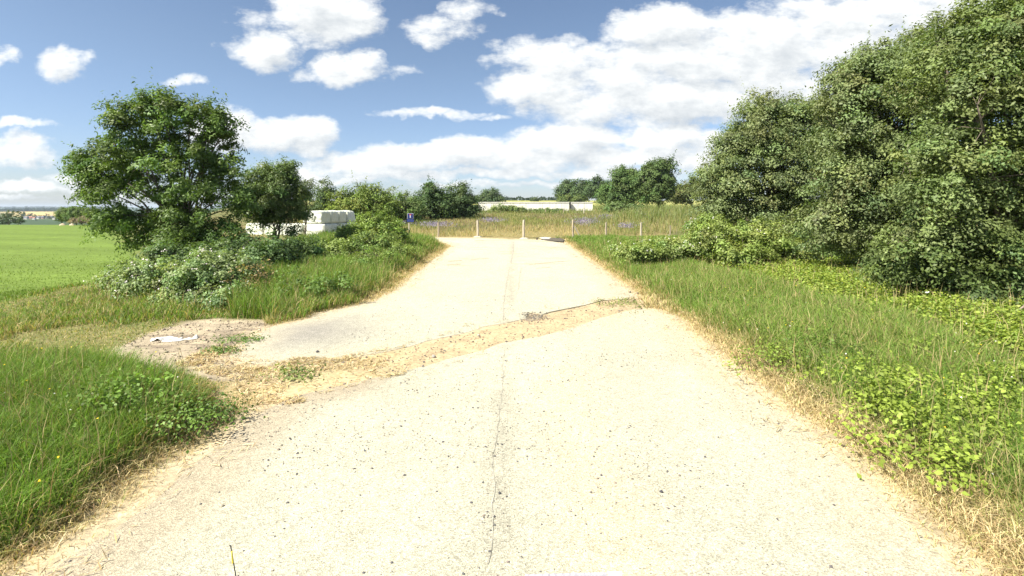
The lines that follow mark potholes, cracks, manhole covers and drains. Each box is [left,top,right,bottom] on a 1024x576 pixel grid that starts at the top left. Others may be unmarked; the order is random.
crack [487,348,505,564]
